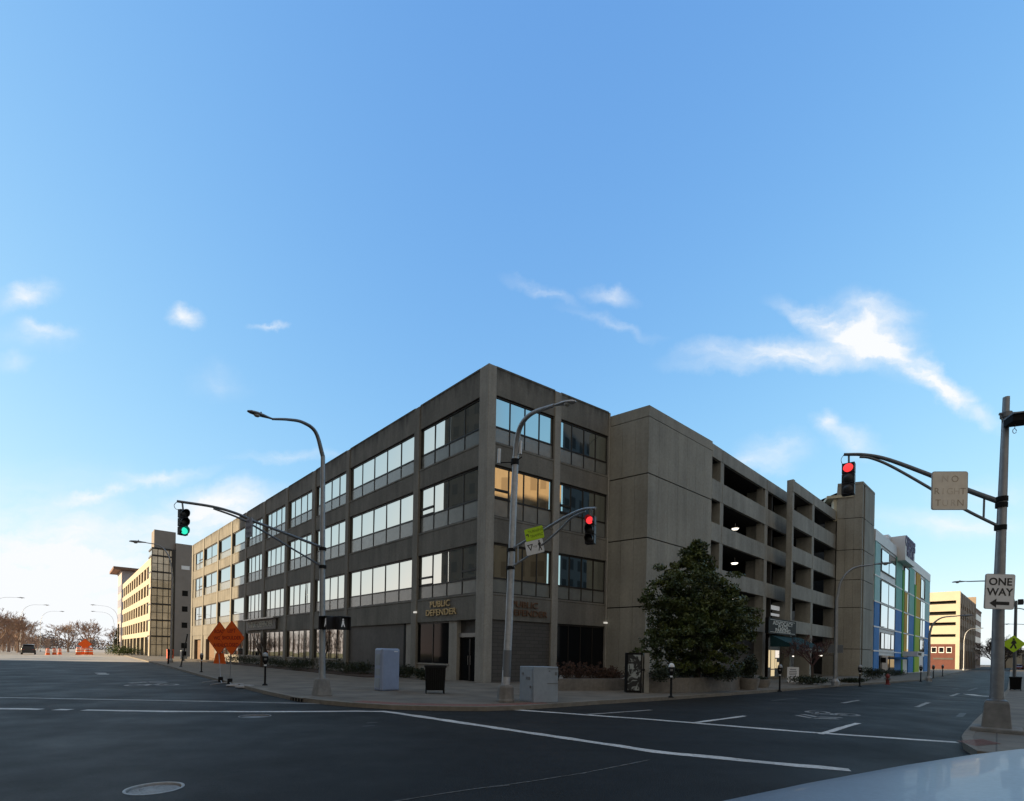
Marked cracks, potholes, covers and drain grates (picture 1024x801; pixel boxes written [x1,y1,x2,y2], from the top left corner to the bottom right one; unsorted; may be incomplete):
manhole cover [122,782,185,795]
